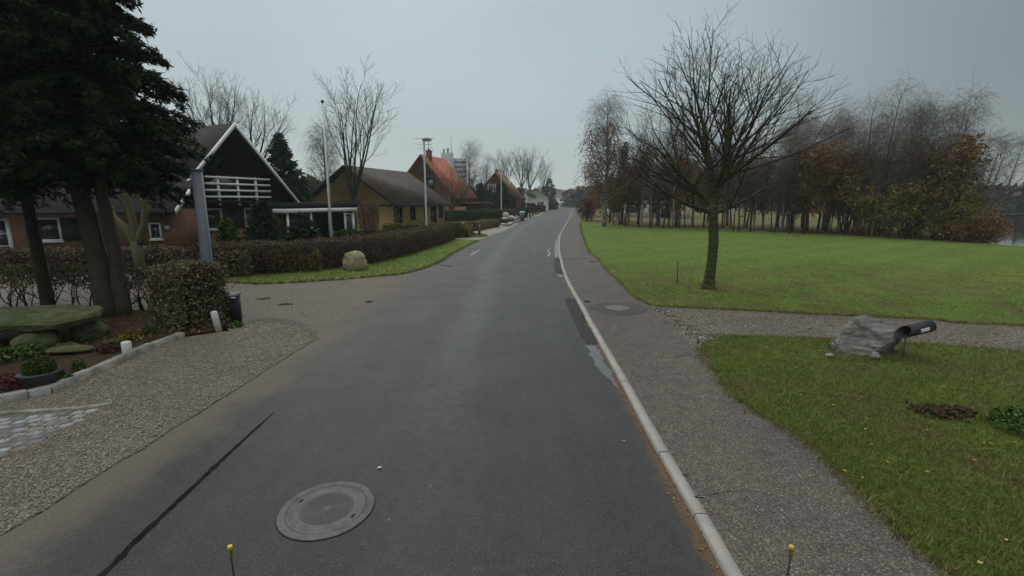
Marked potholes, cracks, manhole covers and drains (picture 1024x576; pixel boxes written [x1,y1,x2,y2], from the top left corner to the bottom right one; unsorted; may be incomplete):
manhole cover [275,481,375,542]
